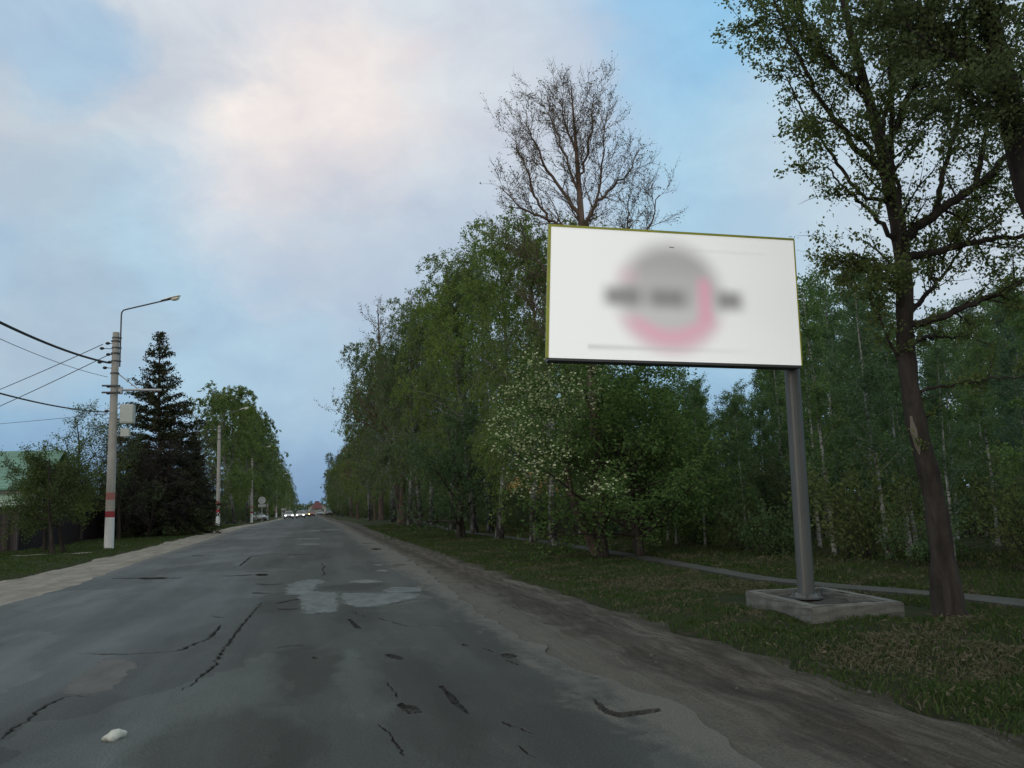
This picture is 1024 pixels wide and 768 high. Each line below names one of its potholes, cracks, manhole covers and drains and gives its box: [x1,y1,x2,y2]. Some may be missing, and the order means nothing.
crack [502,721,543,760]
crack [233,553,325,610]
pothole [438,685,469,714]
crack [1,695,88,739]
crack [378,724,405,756]
crack [385,683,399,698]
crack [76,616,224,655]
pothole [397,703,422,714]
